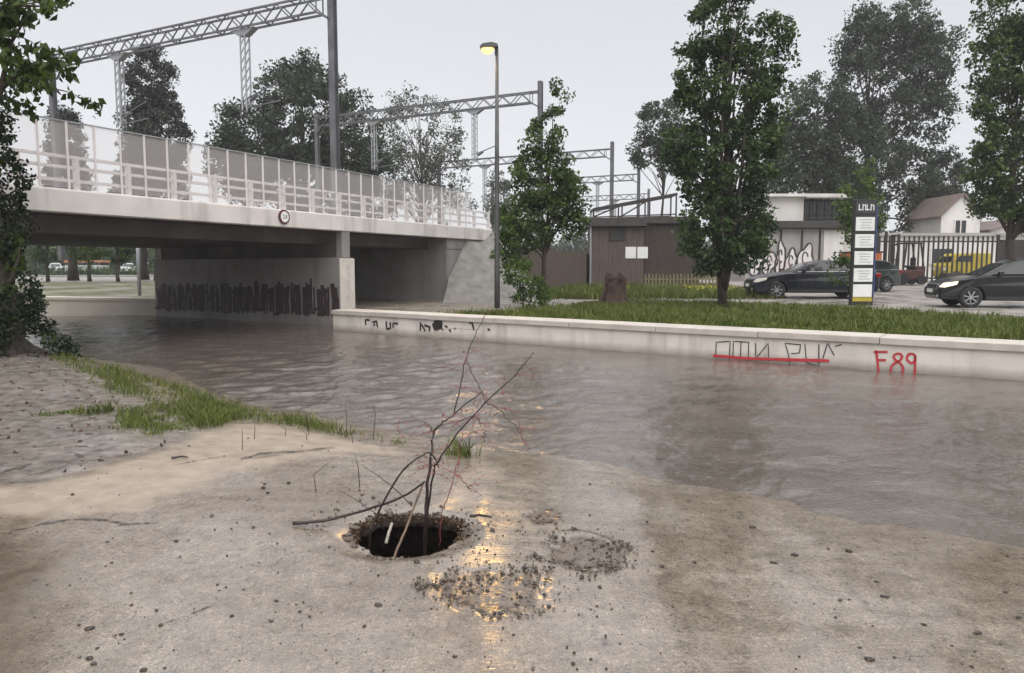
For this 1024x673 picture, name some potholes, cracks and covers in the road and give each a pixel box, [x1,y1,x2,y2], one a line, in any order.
pothole [520,503,562,524]
pothole [526,526,642,578]
crack [4,518,156,533]
crack [243,448,326,458]
